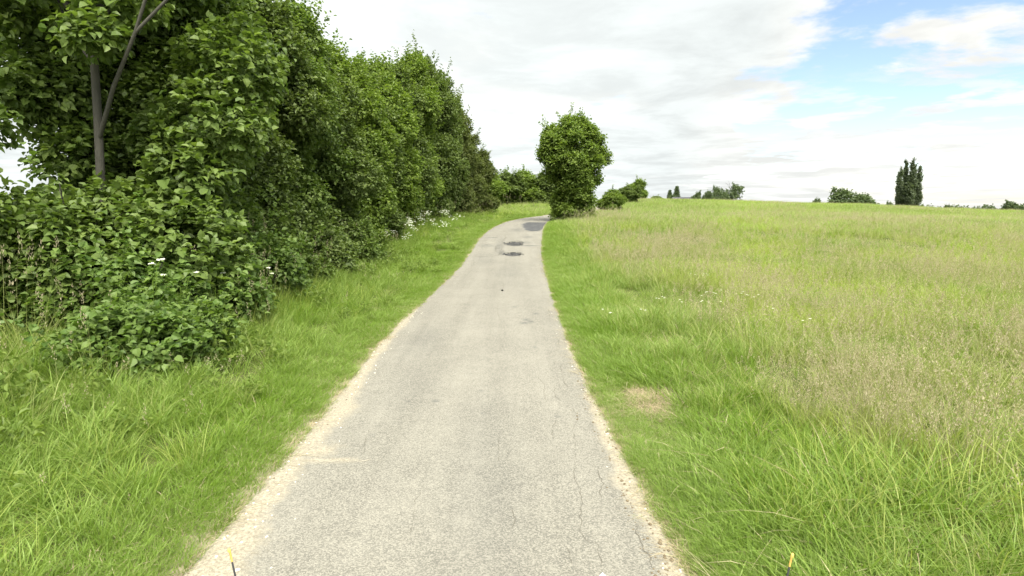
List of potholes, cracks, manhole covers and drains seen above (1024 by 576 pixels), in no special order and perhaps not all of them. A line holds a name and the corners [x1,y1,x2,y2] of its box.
crack [538,347,604,564]
